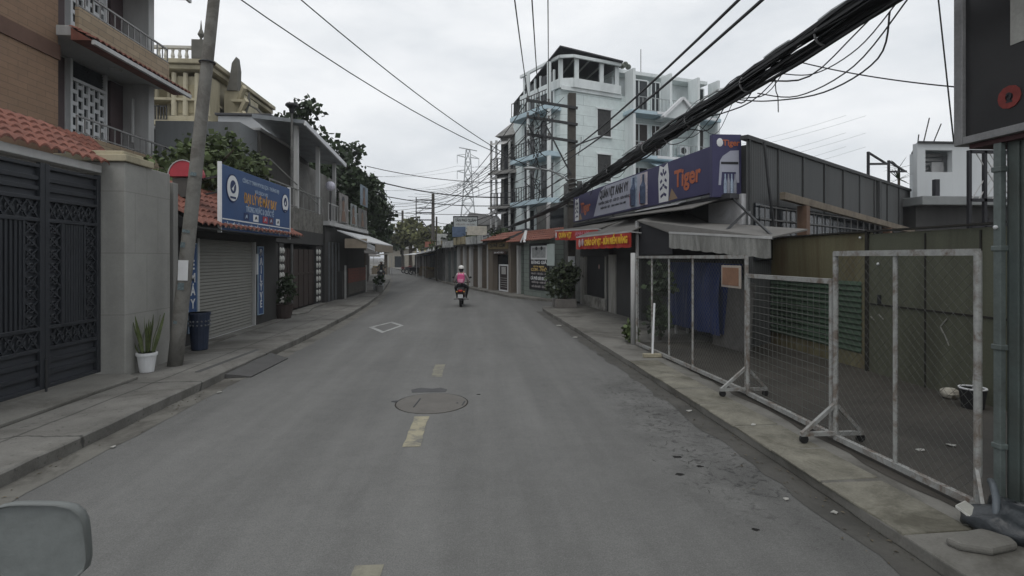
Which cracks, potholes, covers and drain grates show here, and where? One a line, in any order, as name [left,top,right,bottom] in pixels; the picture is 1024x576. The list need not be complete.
crack [611,391,758,493]
manhole cover [391,393,468,414]
